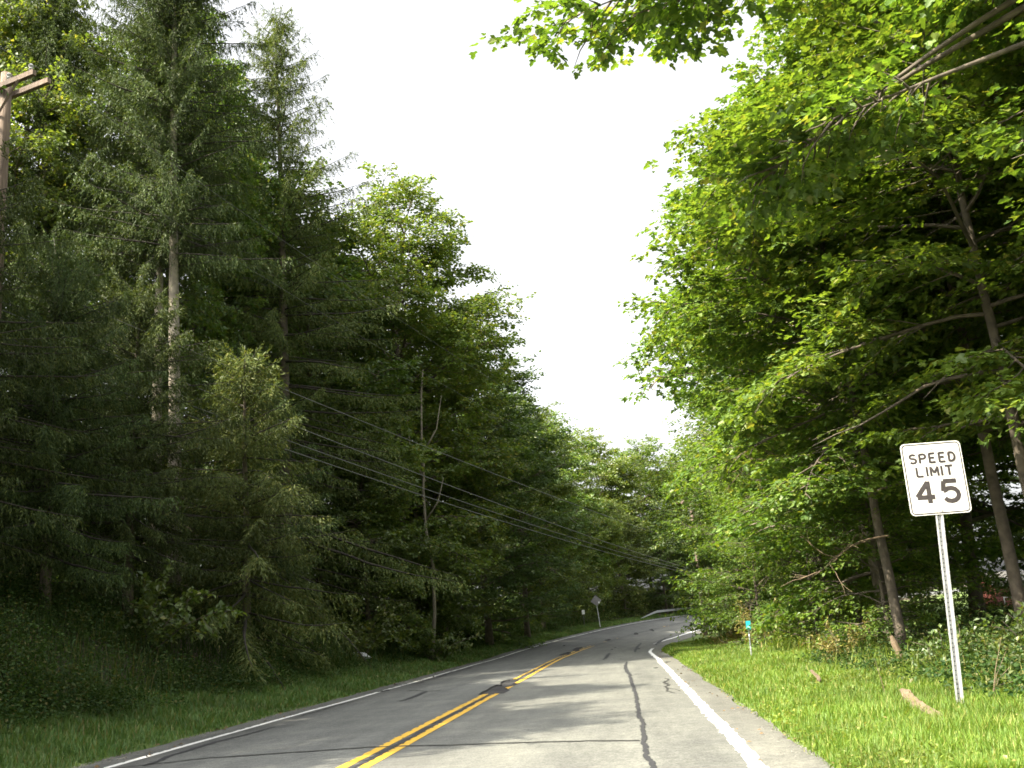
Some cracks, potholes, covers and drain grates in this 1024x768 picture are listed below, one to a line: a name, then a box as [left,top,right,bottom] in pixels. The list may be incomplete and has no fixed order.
pothole [478,679,519,695]
